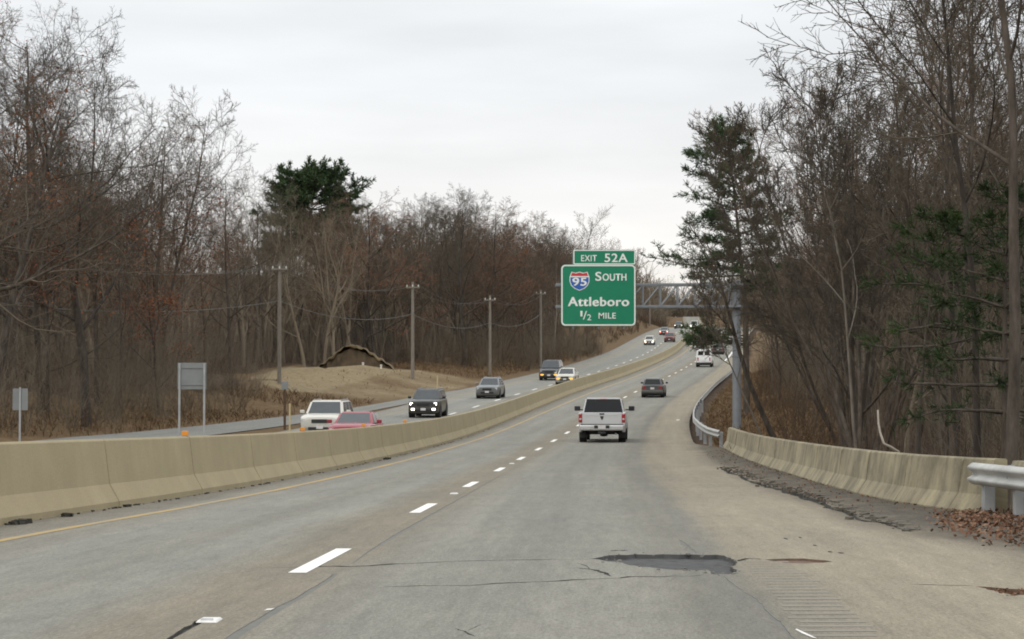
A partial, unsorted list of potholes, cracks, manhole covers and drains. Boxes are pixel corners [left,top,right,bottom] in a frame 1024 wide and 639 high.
crack [389,563,699,587]
pothole [592,554,737,574]
crack [720,468,912,532]
crack [275,559,555,568]
